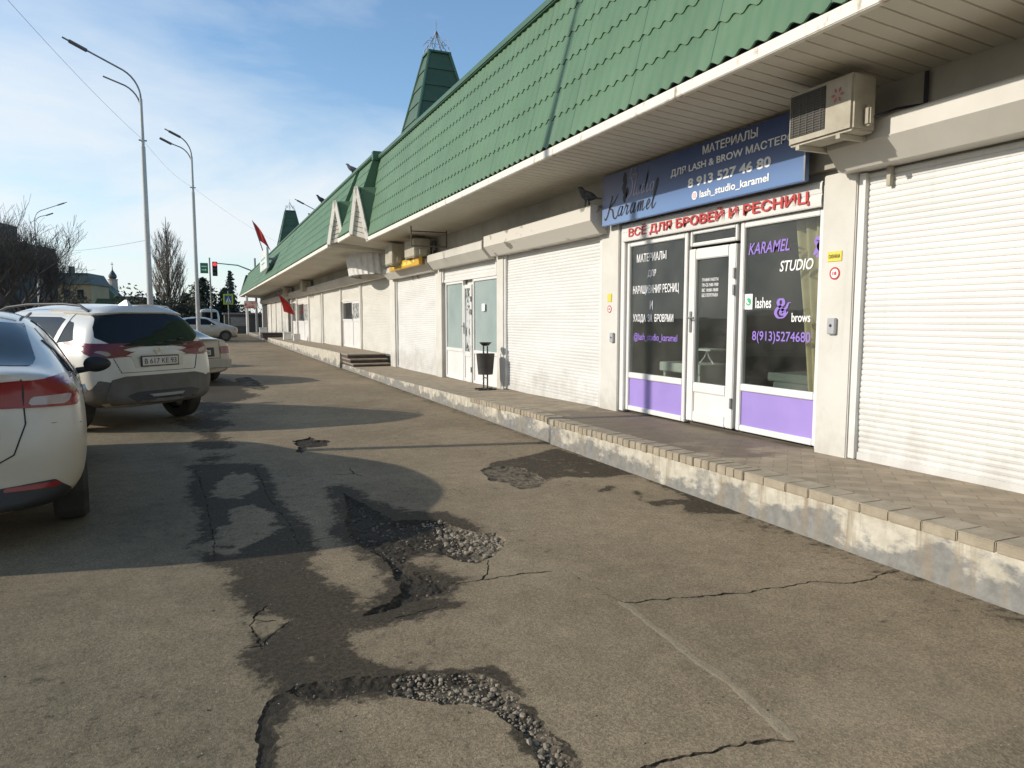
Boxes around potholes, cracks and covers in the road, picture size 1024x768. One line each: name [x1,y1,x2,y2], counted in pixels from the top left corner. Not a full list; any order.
pothole [285,671,581,768]
crack [244,605,288,649]
pothole [480,466,547,489]
crack [458,560,900,603]
pothole [343,493,506,616]
pothole [293,437,330,453]
crack [640,738,795,768]
